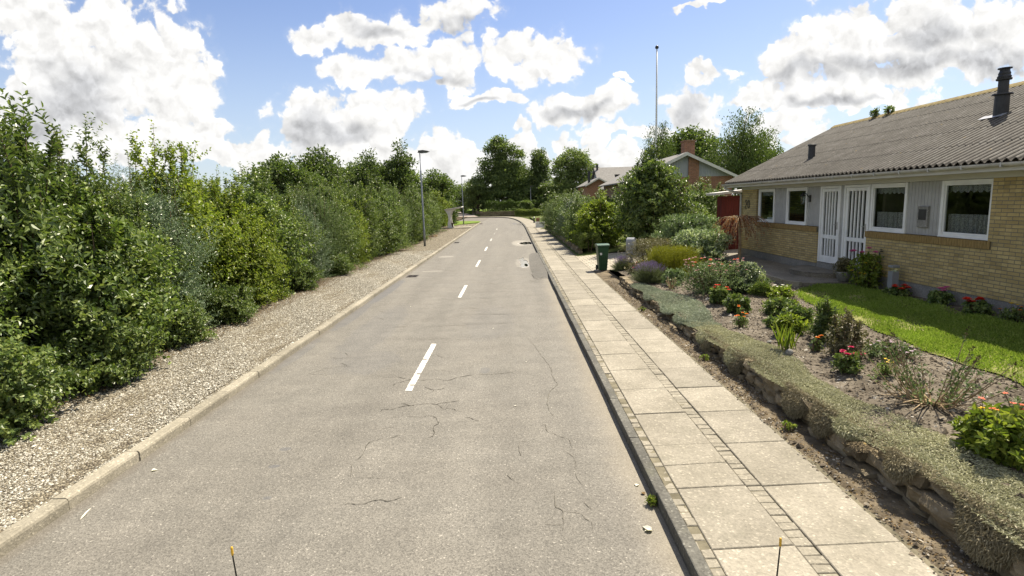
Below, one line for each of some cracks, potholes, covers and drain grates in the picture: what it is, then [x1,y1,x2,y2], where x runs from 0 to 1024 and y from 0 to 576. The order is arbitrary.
crack [350,283,511,478]
crack [536,348,593,527]
